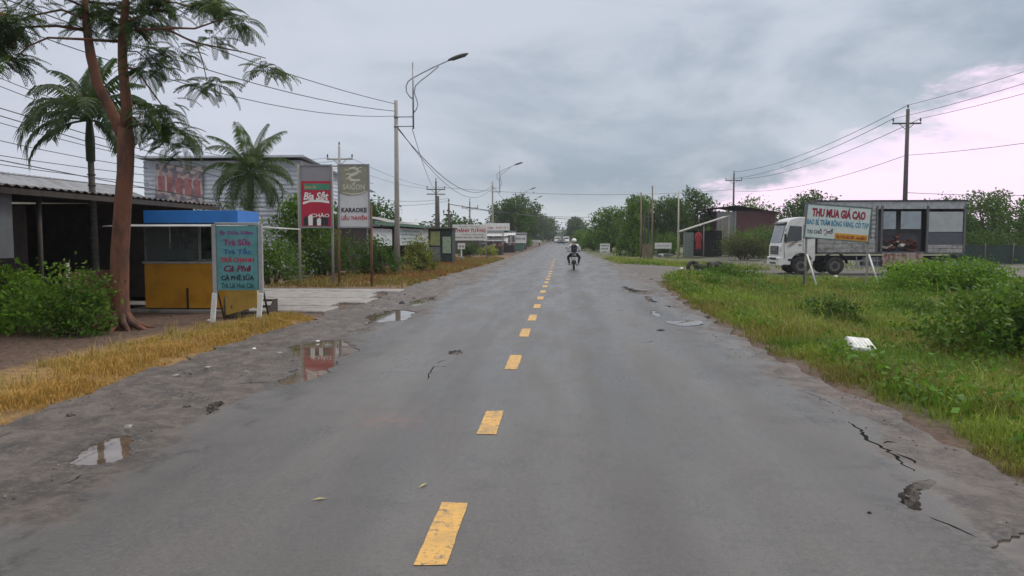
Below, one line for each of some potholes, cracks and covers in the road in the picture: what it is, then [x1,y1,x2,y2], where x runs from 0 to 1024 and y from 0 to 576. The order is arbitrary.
pothole [365,310,417,323]
pothole [205,401,225,415]
crack [802,391,916,471]
pothole [68,435,134,465]
crack [931,517,978,538]
pothole [898,479,936,511]
